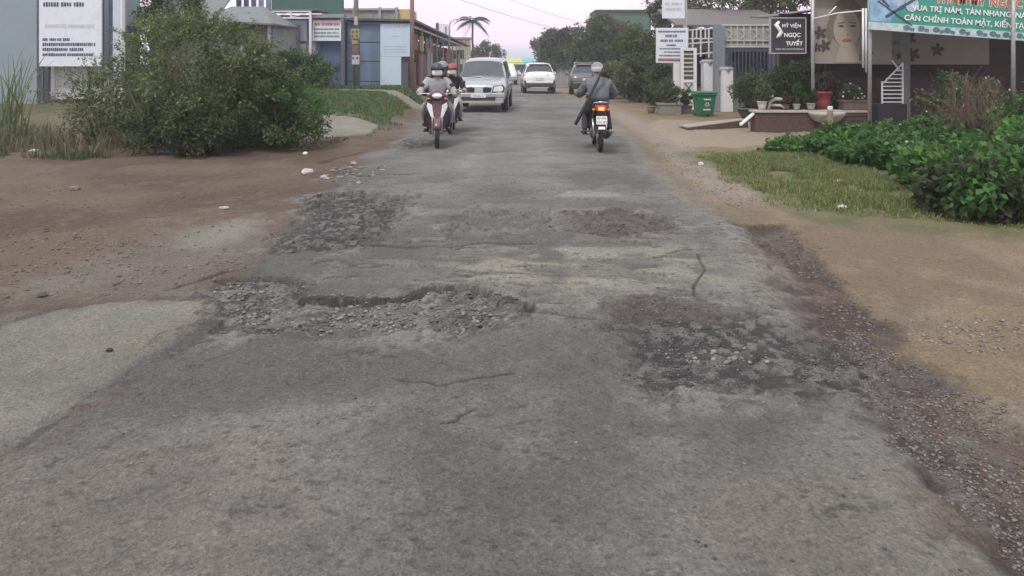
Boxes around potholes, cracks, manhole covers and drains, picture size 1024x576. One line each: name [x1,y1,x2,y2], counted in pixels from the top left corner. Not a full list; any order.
pothole [260,189,420,255]
pothole [433,208,683,241]
pothole [583,288,901,414]
crack [689,253,708,298]
crack [394,371,516,387]
crack [440,407,478,425]
pothole [187,275,538,343]
